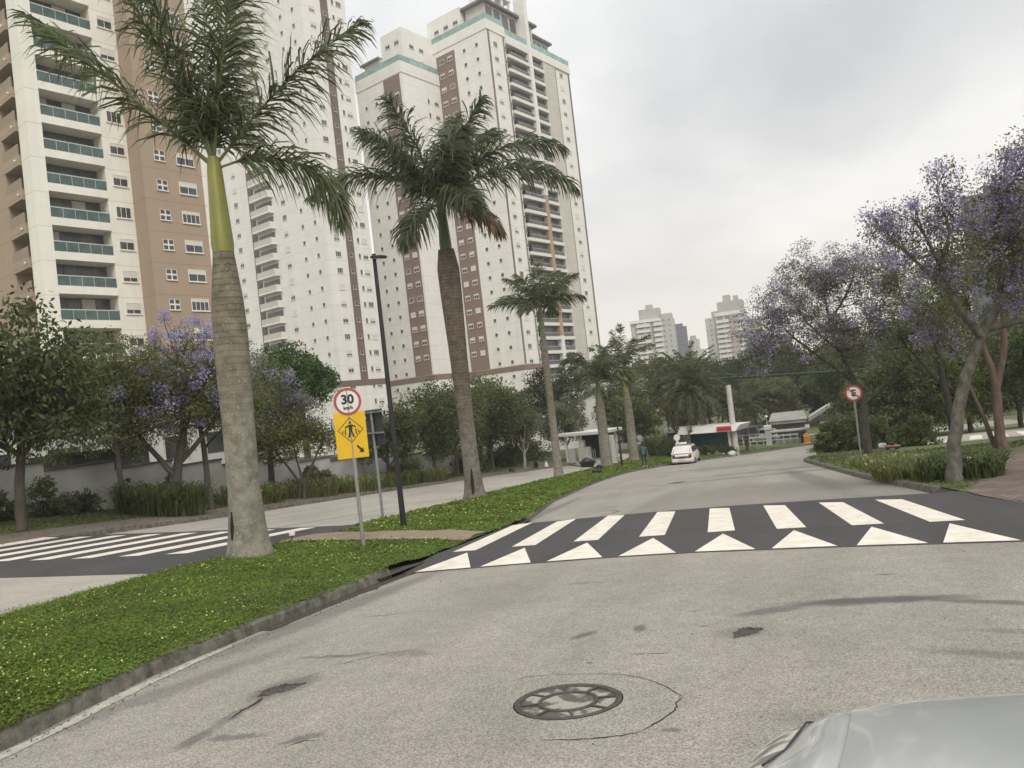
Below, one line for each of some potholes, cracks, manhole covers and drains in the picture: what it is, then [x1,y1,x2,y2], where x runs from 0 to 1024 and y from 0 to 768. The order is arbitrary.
crack [513,674,682,740]
manhole cover [514,683,622,720]
pothole [731,627,764,638]
